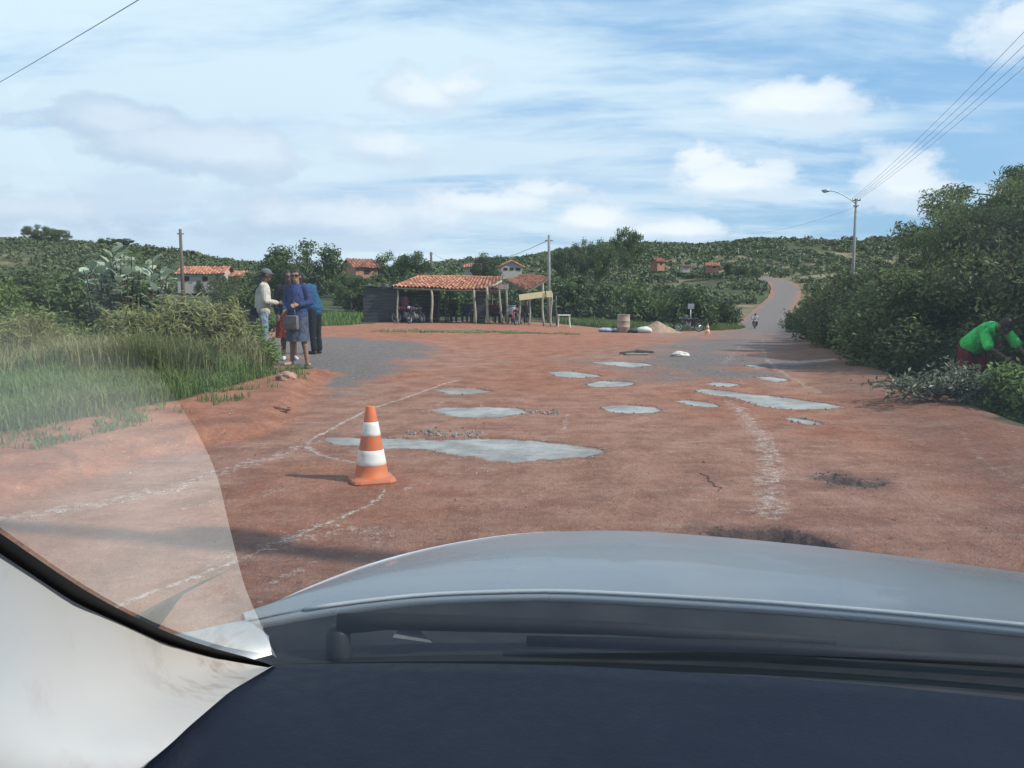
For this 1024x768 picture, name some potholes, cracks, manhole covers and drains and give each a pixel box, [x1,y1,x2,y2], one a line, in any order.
pothole [814,471,888,489]
pothole [699,525,839,549]
